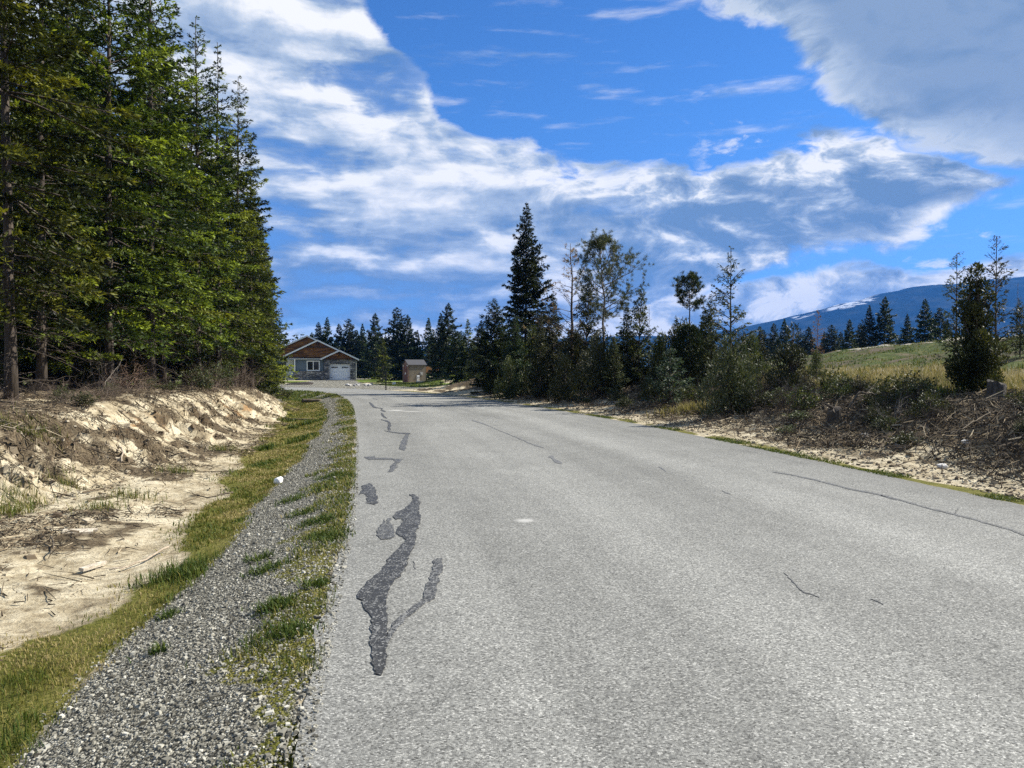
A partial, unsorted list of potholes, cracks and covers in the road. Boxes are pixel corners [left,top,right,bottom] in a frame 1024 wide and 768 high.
crack [774,472,1024,536]
crack [472,420,544,448]
